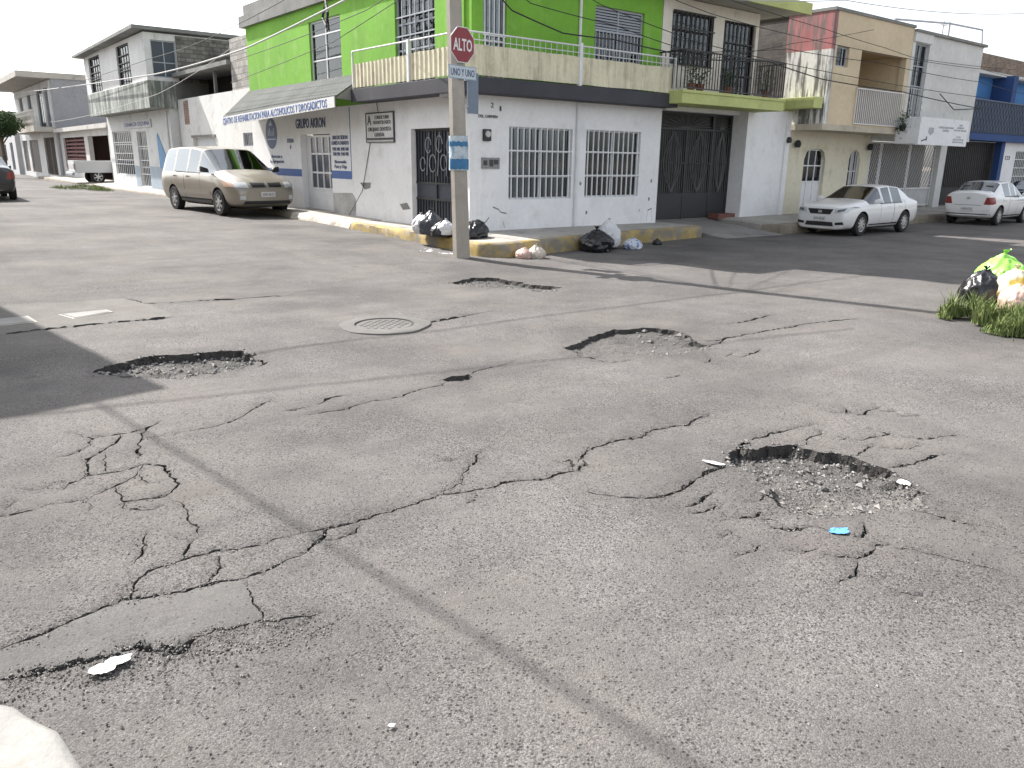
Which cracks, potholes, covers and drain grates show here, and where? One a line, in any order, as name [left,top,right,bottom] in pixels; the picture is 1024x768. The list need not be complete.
crack [708,316,851,362]
pothole [448,277,562,292]
pothole [92,348,261,379]
crack [0,416,705,681]
crack [587,408,996,597]
manhole cover [338,315,431,335]
pothole [443,374,472,382]
crack [180,400,271,433]
pothole [721,439,929,518]
pothole [563,327,711,358]
